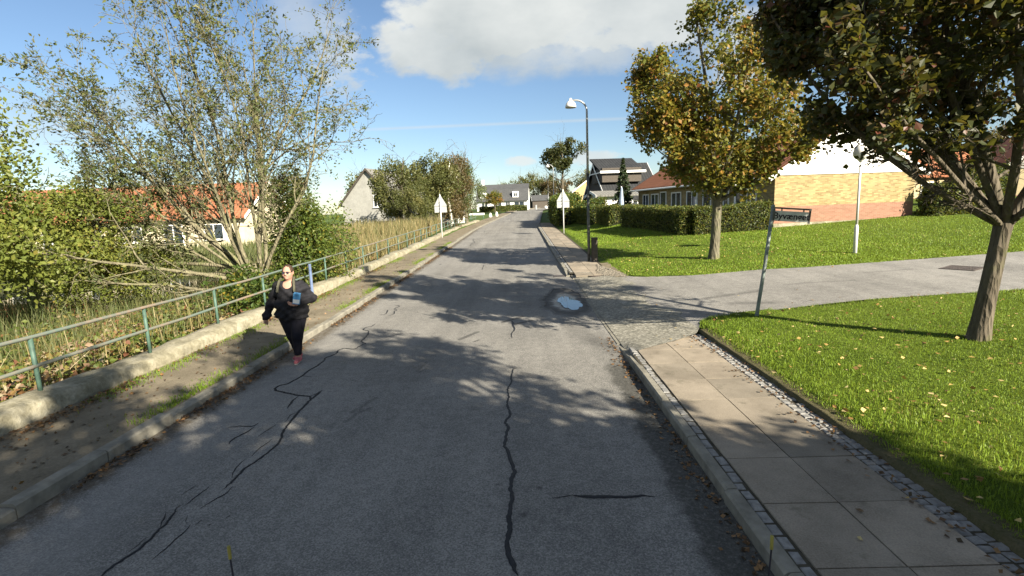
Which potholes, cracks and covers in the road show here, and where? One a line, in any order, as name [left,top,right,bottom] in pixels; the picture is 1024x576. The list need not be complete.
pothole [536,288,592,316]
crack [101,305,400,576]
